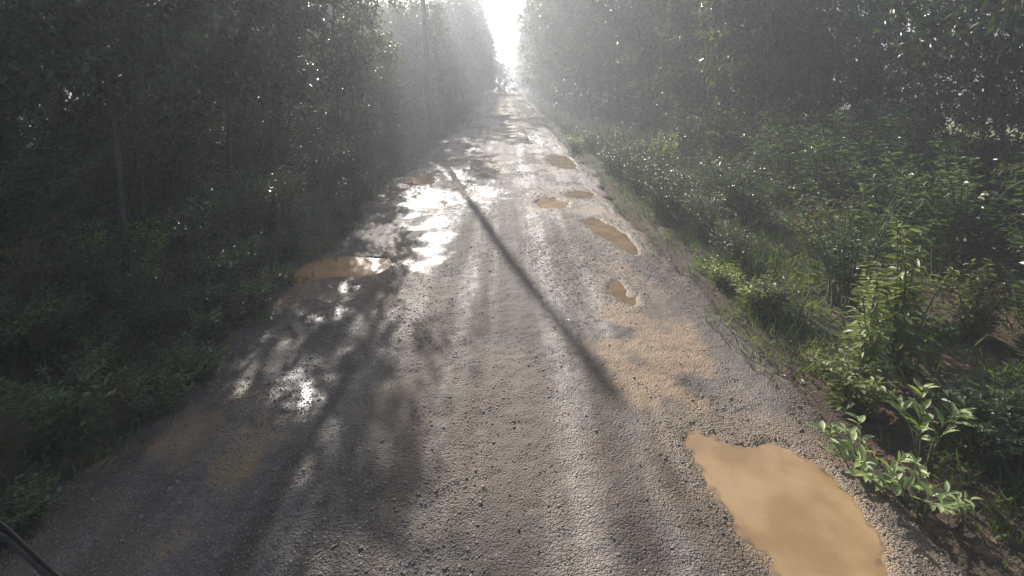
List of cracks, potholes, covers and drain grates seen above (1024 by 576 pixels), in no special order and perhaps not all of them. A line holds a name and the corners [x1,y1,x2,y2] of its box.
pothole [681,427,895,576]
pothole [400,173,438,186]
pothole [283,255,396,285]
pothole [563,190,595,199]
pothole [609,280,638,306]
pothole [534,197,570,208]
pothole [581,218,640,255]
pothole [545,154,578,169]
